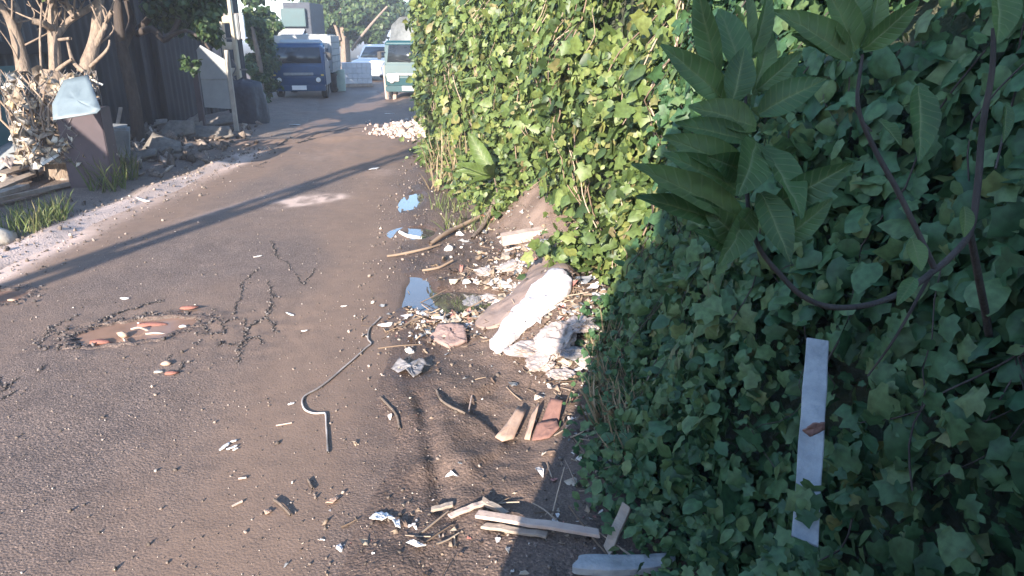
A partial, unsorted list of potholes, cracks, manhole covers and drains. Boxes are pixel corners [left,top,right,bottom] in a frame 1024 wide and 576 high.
crack [0,299,165,400]
crack [164,240,316,376]
pothole [23,308,235,352]
